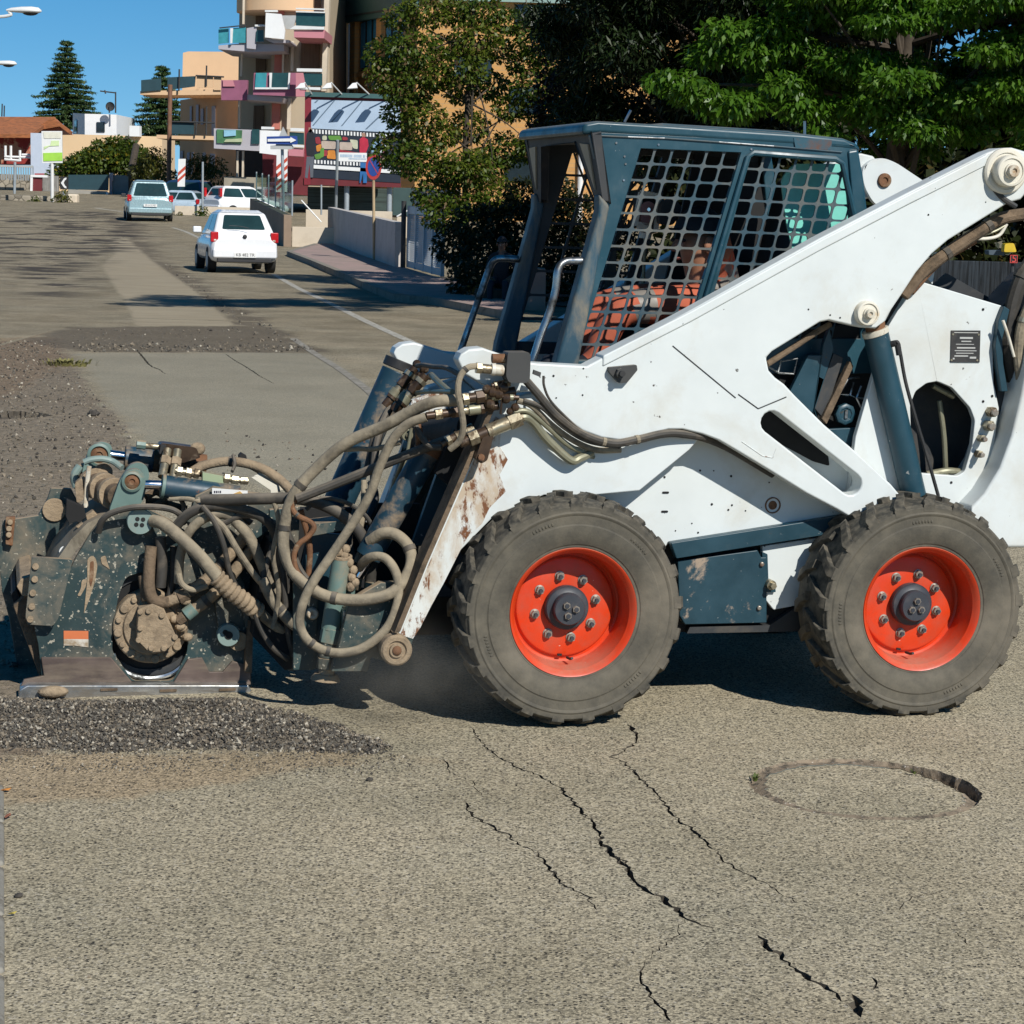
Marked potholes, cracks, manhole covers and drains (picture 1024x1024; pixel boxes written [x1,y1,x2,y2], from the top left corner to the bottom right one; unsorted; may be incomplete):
crack [443,724,878,1022]
manhole cover [748,759,982,820]
